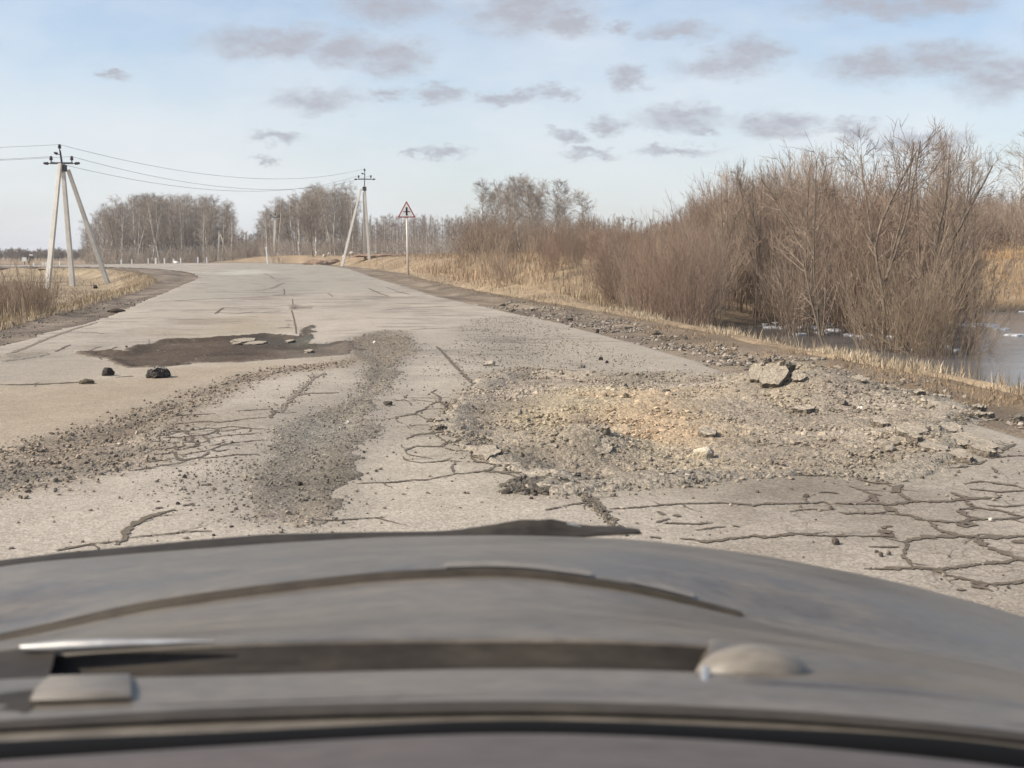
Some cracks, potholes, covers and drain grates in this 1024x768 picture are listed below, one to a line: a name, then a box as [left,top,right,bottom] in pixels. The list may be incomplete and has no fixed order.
crack [56,503,212,551]
crack [609,441,1024,591]
crack [357,346,522,488]
crack [129,373,339,471]
pothole [440,360,993,496]
